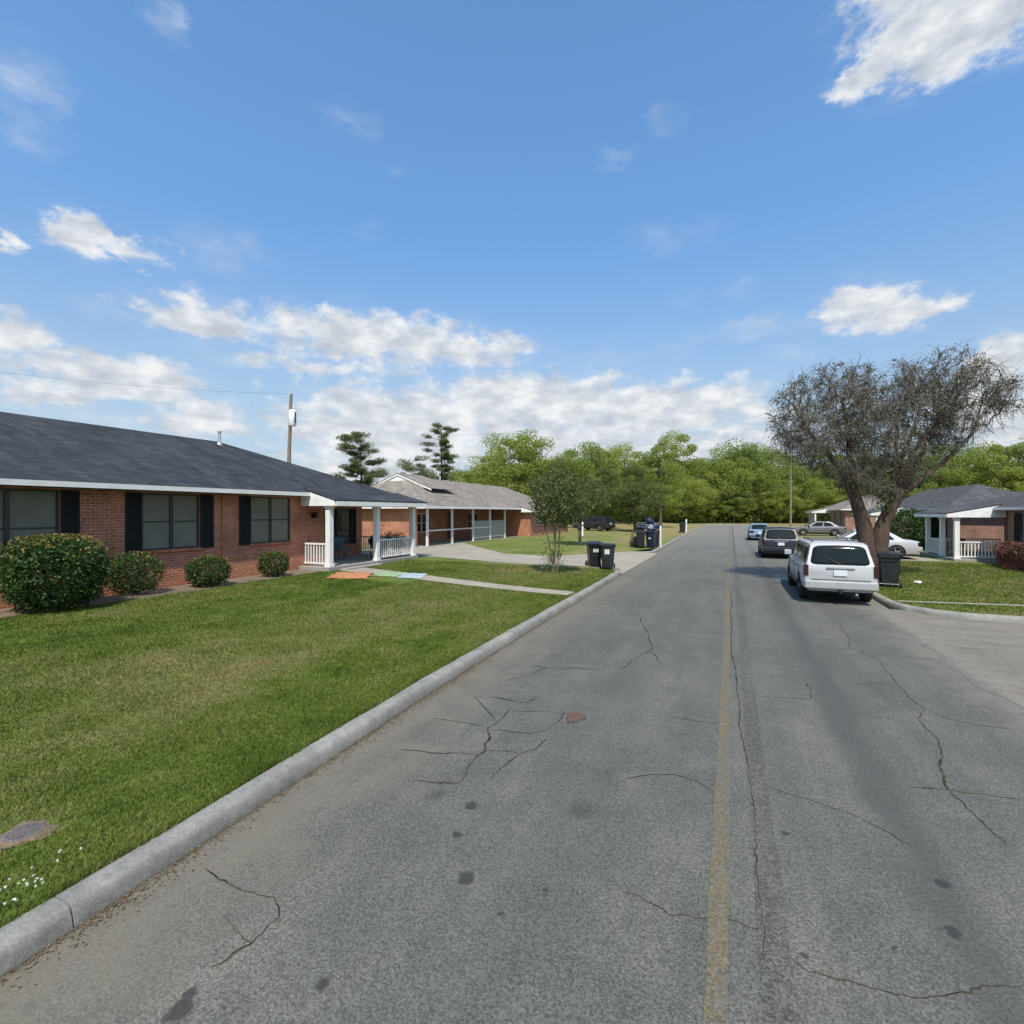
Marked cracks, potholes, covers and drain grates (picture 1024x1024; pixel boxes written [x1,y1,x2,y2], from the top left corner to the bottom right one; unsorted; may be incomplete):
crack [400,697,565,783]
crack [621,593,1022,998]
crack [204,867,280,967]
